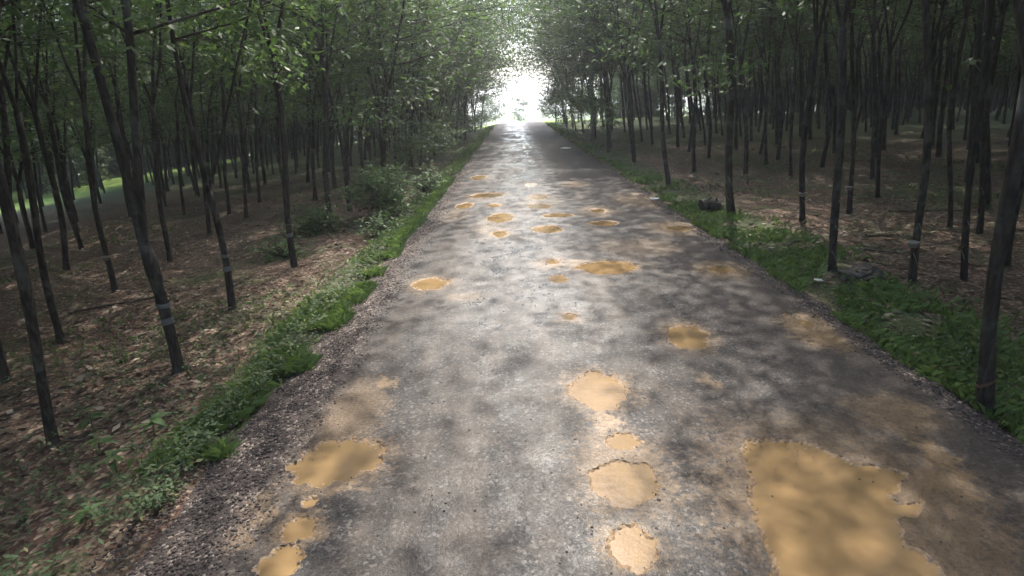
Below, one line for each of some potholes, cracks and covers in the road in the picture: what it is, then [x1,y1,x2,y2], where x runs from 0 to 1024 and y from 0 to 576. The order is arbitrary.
pothole [586,459,661,509]
pothole [530,225,564,233]
pothole [782,313,835,334]
pothole [485,213,515,223]
pothole [665,323,711,350]
pothole [251,541,307,576]
pothole [285,436,389,489]
pothole [739,437,947,576]
pothole [279,514,320,545]
pothole [410,276,451,290]
pothole [603,432,644,450]
pothole [571,260,642,275]
